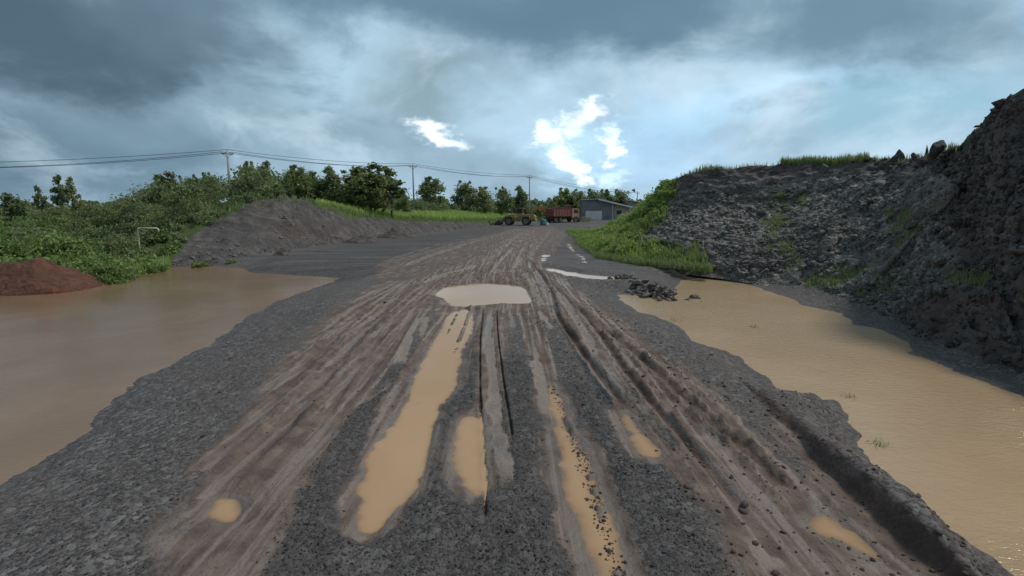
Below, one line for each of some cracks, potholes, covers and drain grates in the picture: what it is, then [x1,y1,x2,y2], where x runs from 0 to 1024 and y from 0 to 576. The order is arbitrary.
pothole [428,280,539,308]
pothole [327,305,484,545]
pothole [527,376,671,576]
pothole [427,405,513,513]
